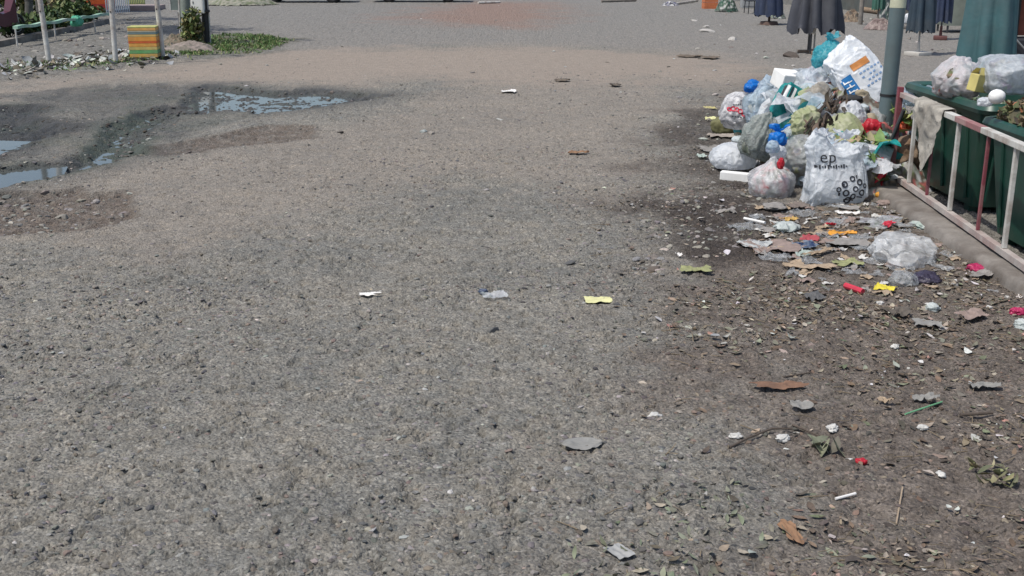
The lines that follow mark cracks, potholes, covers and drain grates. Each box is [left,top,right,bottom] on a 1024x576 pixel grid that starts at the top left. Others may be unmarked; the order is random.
pothole [0,186,144,236]
pothole [0,104,188,190]
pothole [173,83,395,118]
